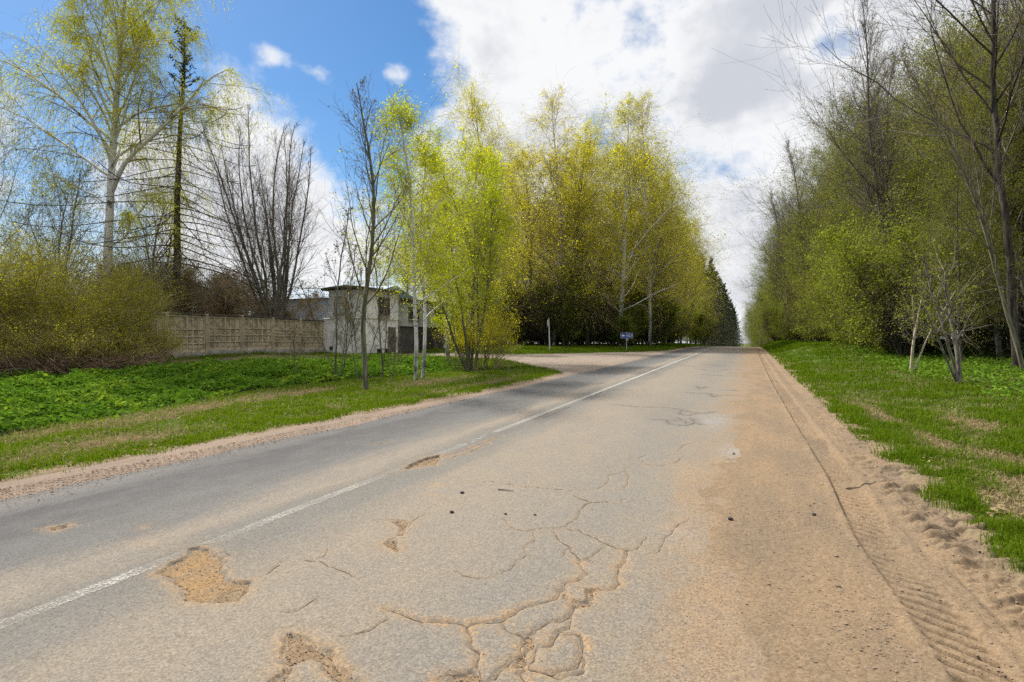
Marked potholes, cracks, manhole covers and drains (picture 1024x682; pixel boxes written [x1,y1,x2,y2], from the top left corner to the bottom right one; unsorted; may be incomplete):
crack [623,362,736,426]
pothole [281,638,352,682]
pothole [413,458,439,468]
crack [459,443,691,562]
pothole [160,550,249,603]
crack [291,597,387,636]
